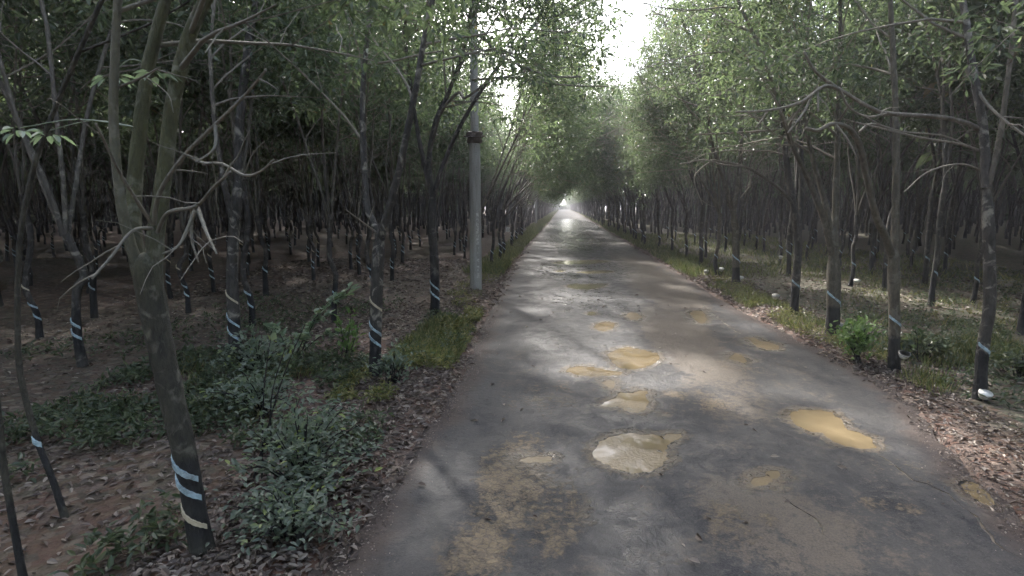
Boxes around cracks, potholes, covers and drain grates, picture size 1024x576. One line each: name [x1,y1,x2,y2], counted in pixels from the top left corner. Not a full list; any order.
pothole [750,470,781,486]
pothole [788,409,877,449]
pothole [601,390,649,413]
pothole [958,480,996,506]
pothole [747,337,779,350]
pothole [592,432,683,474]
crack [779,494,835,542]
pothole [605,347,661,369]
pothole [566,366,625,377]
crack [878,454,1023,559]
pothole [593,322,615,331]
